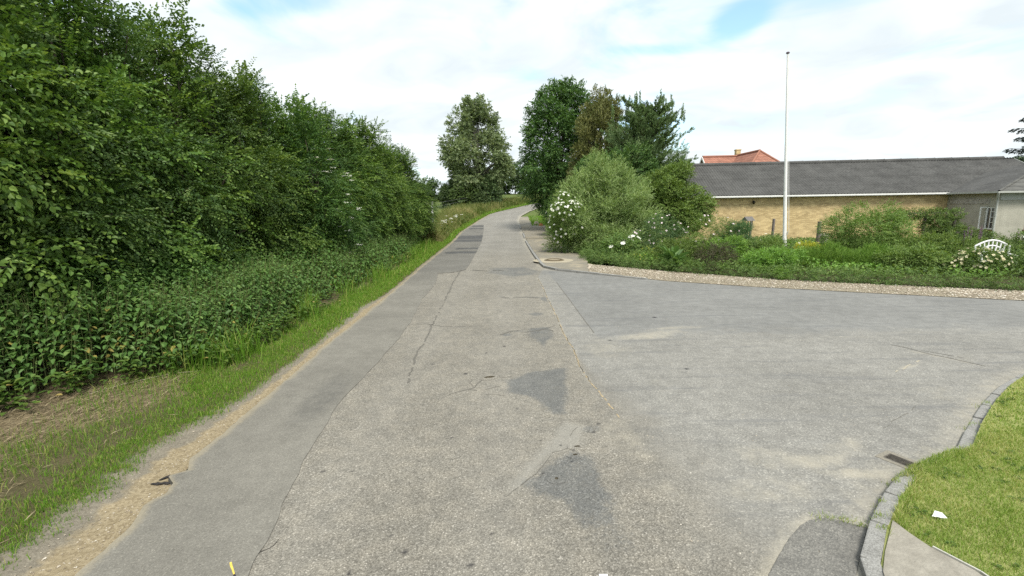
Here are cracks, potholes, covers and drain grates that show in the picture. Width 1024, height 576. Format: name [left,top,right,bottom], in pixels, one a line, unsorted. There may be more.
drain grate [875,450,919,468]
crack [895,345,983,372]
crack [506,428,576,497]
crack [407,271,460,383]
